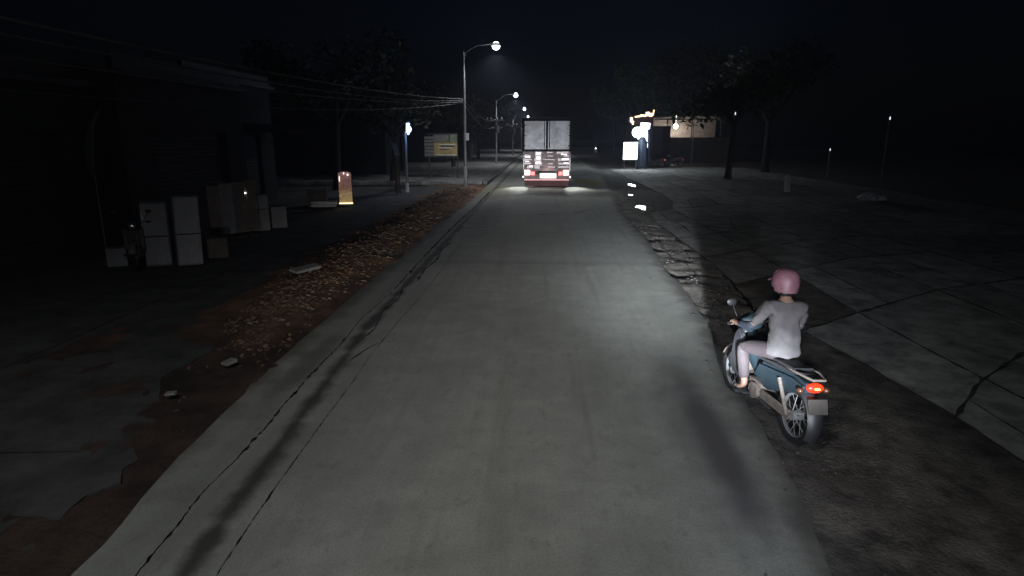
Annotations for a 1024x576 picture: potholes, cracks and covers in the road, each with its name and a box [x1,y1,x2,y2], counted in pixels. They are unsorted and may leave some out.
crack [135,192,502,576]
